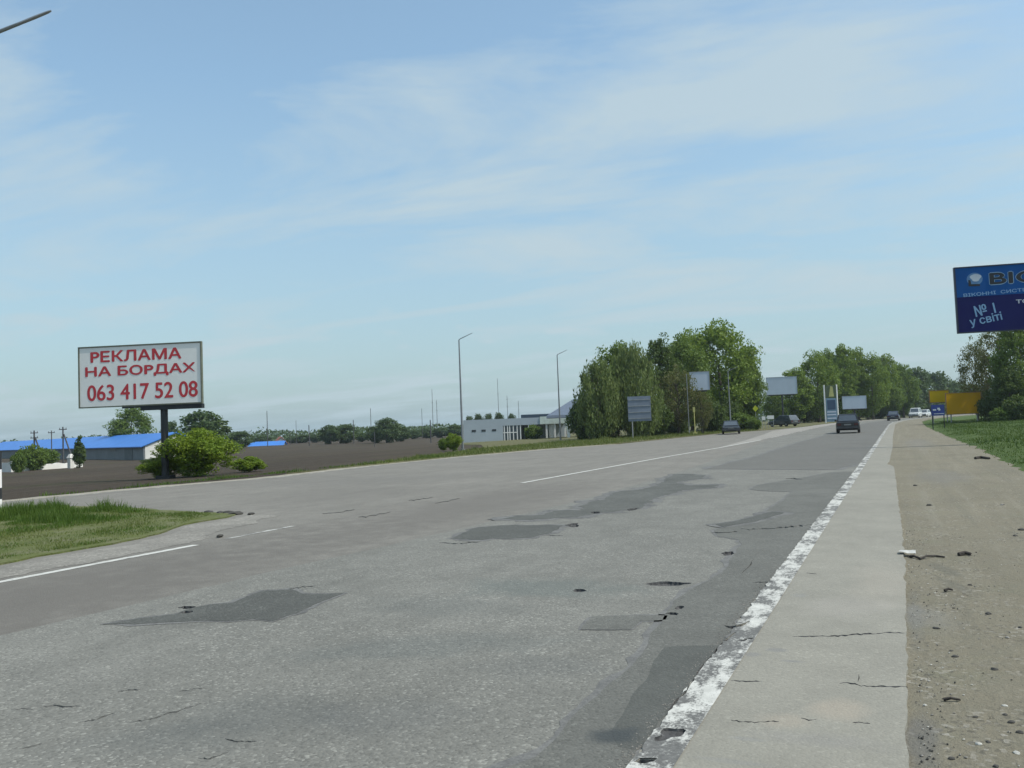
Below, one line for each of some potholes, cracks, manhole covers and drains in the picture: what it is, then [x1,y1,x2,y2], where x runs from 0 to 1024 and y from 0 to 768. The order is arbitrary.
crack [199,738,256,760]
crack [133,688,202,722]
crack [843,677,907,688]
crack [16,704,114,722]
pothole [654,728,685,741]
